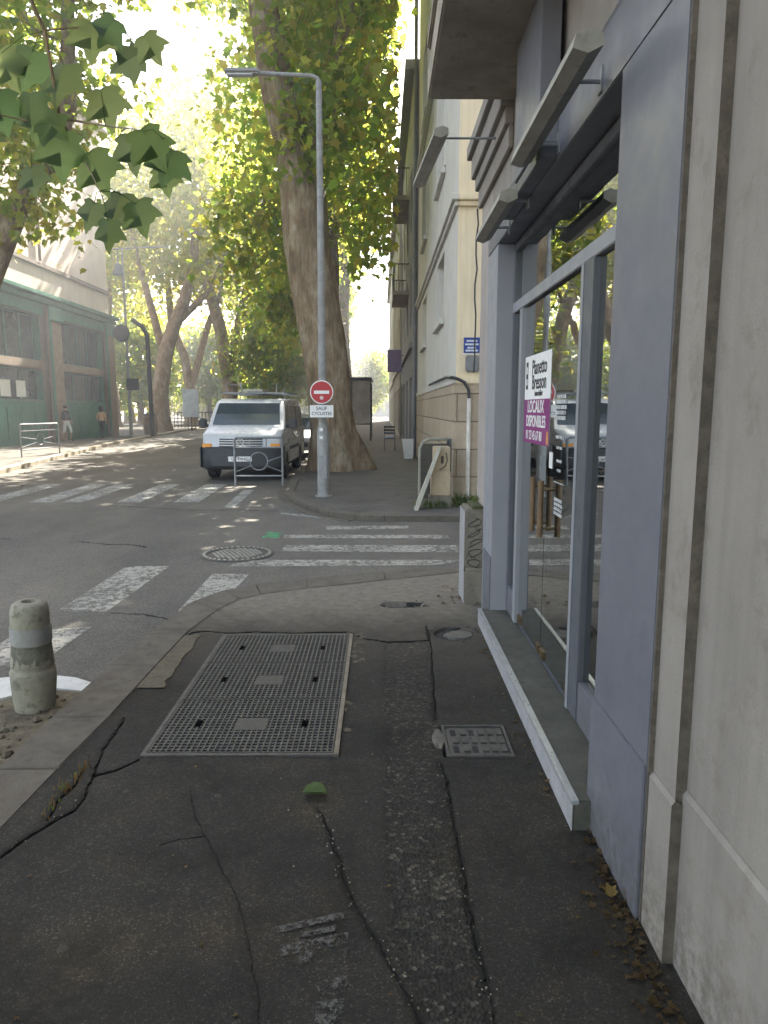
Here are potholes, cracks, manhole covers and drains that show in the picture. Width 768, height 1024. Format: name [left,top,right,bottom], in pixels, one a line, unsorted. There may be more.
crack [0,717,140,859]
manhole cover [432,725,515,758]
crack [159,791,260,1023]
crack [439,762,495,1024]
crack [317,808,423,1024]
manhole cover [200,546,274,562]
